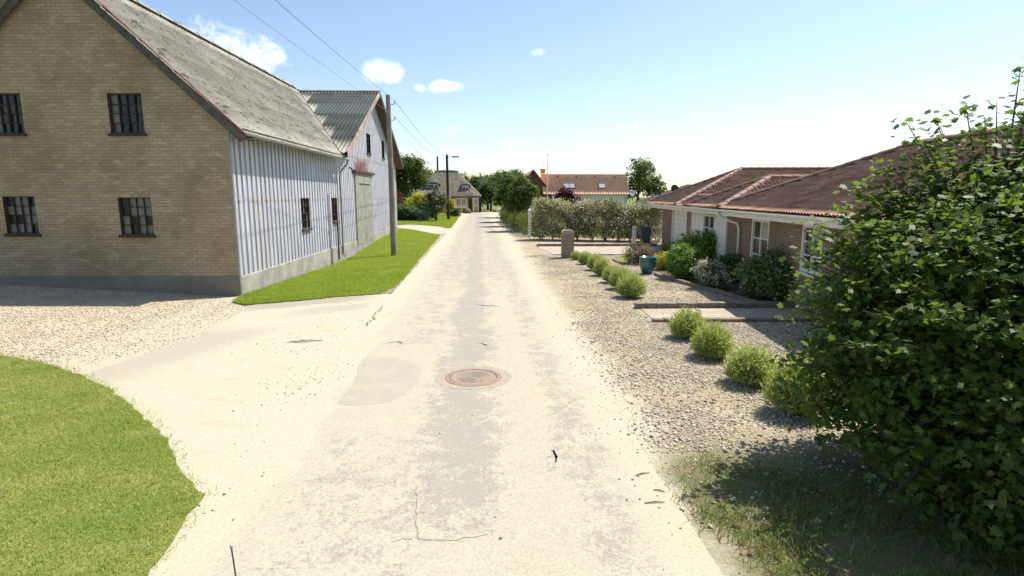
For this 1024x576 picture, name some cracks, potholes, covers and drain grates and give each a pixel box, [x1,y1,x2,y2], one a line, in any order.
manhole cover [435,367,512,390]
